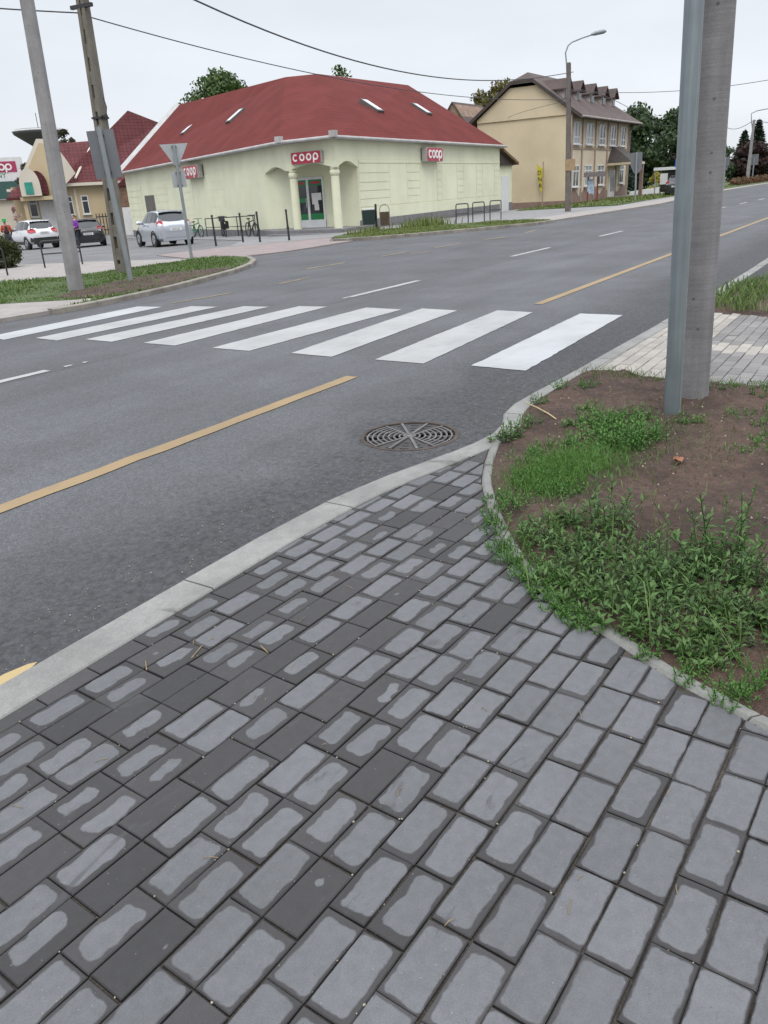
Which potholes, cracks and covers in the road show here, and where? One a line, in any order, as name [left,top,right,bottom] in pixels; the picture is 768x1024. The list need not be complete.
drain grate [360,421,460,451]
